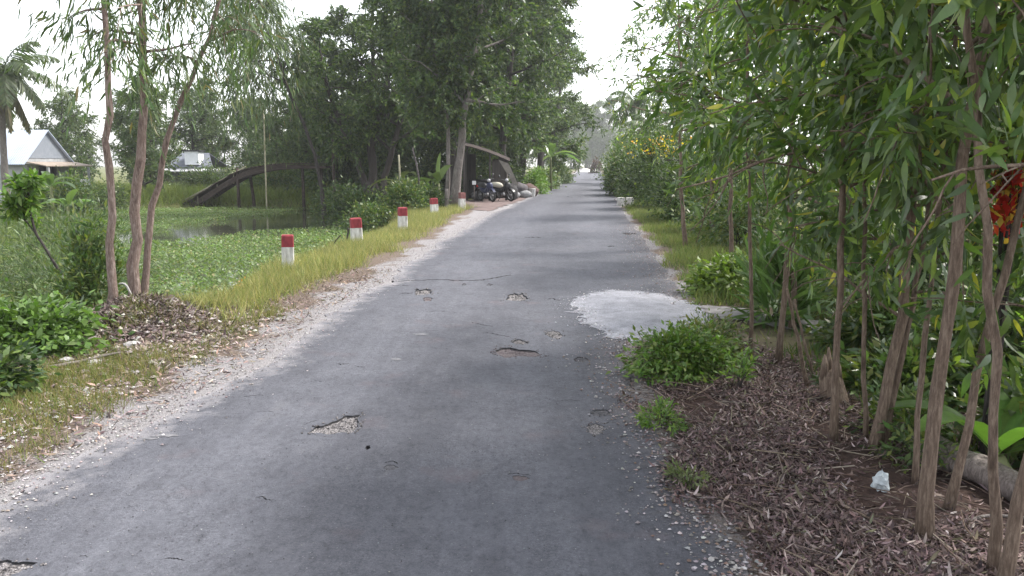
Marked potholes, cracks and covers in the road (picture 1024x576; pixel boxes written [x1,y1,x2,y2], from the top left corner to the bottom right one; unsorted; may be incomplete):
pothole [0,558,47,576]
pothole [589,408,613,416]
pothole [301,412,366,437]
pothole [543,329,565,339]
pothole [580,421,611,437]
pothole [491,345,549,358]
pothole [503,292,531,302]
